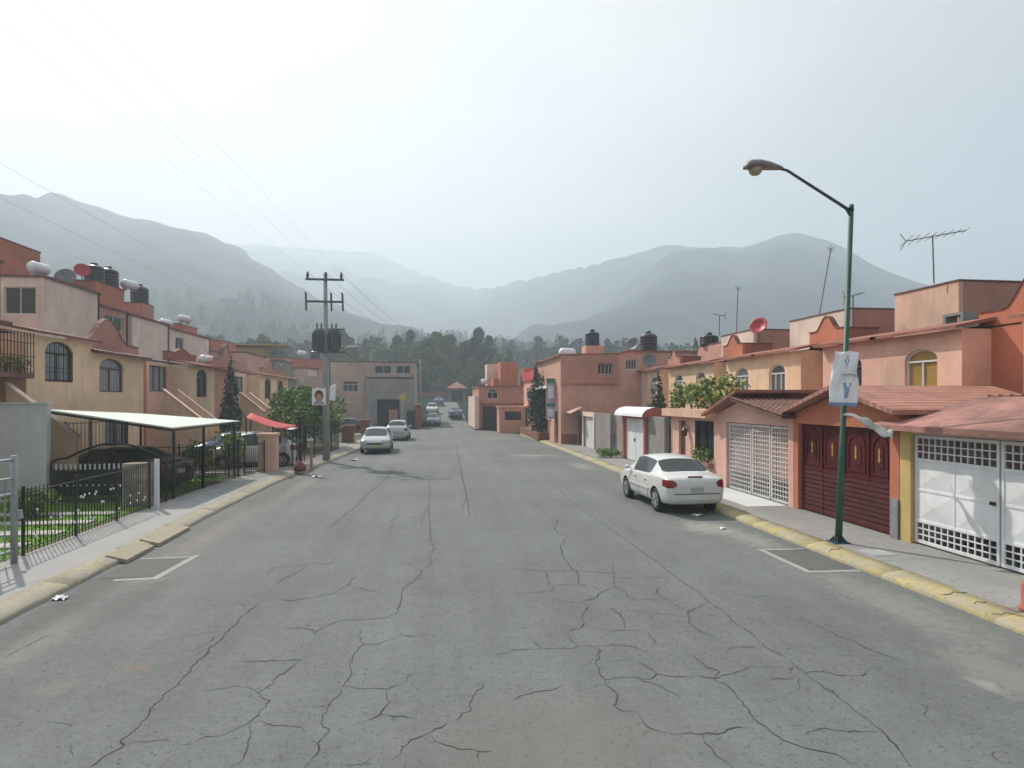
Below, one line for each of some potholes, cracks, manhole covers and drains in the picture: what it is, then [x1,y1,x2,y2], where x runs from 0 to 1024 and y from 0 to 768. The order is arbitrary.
crack [279,483,435,633]
crack [90,603,257,767]
crack [500,539,853,767]
crack [195,659,304,765]
crack [395,681,487,766]
crack [306,630,422,766]
